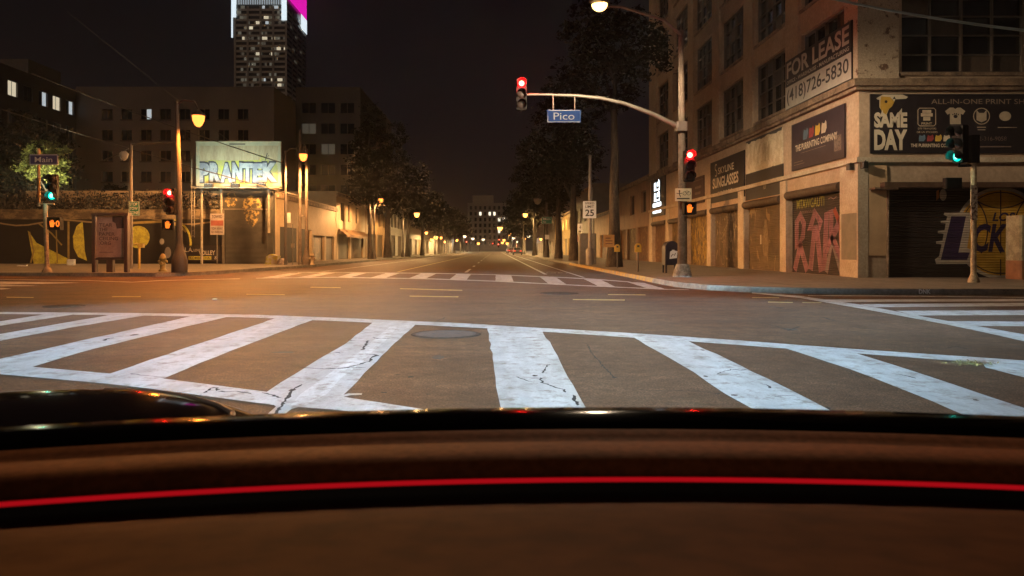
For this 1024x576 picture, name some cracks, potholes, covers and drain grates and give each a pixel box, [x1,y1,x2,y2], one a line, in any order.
crack [518,364,579,405]
crack [201,337,398,414]
manhole cover [411,330,481,339]
